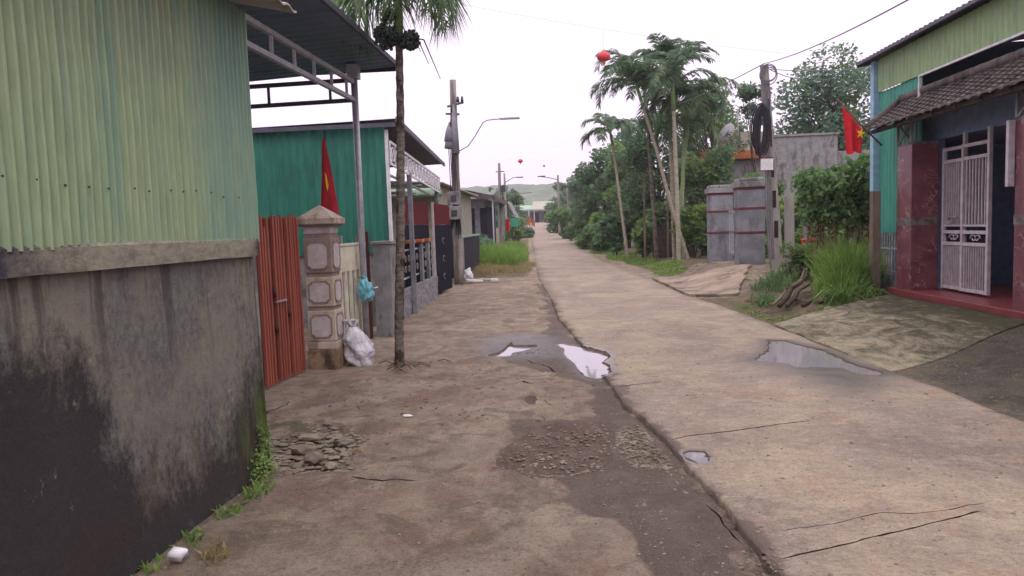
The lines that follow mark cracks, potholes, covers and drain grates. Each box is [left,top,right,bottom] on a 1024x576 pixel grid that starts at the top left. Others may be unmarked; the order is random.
crack [672,421,805,440]
crack [706,504,741,543]
crack [782,502,985,559]
pothole [754,340,884,376]
pothole [615,423,675,470]
pothole [496,420,614,479]
pothole [682,450,710,464]
pothole [488,341,537,356]
pothole [269,422,371,476]
pothole [558,344,613,379]
